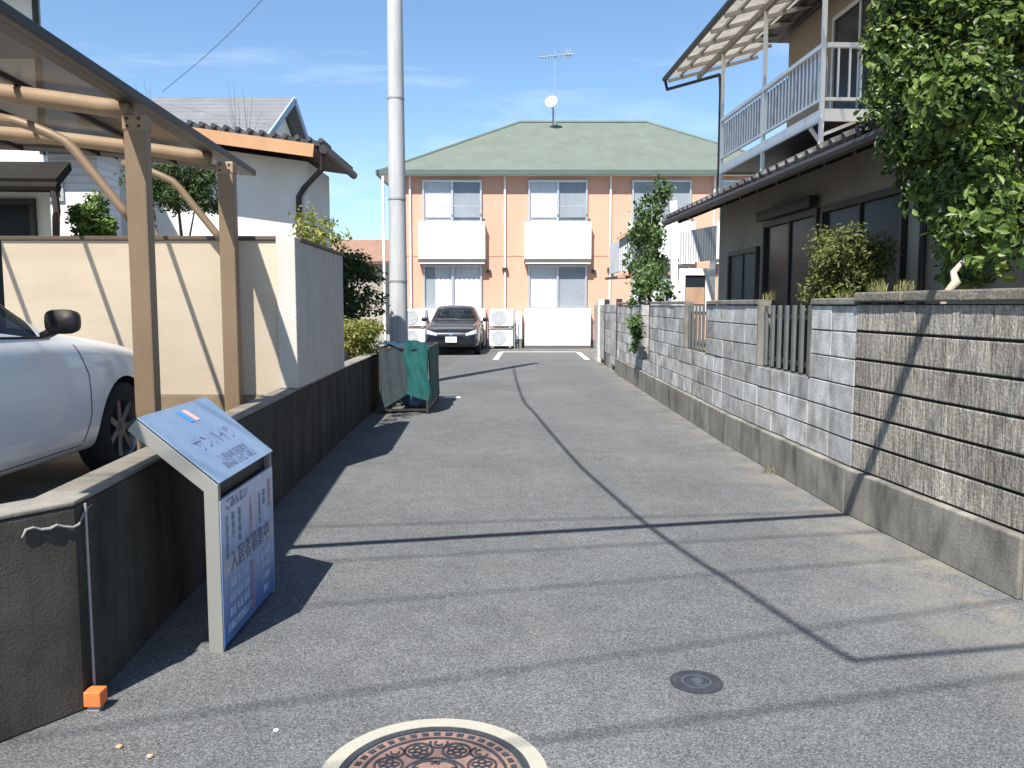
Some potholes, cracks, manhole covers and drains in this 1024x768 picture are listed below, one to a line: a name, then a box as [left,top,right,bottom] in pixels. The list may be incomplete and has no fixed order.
manhole cover [670,670,723,694]
manhole cover [322,718,547,768]
